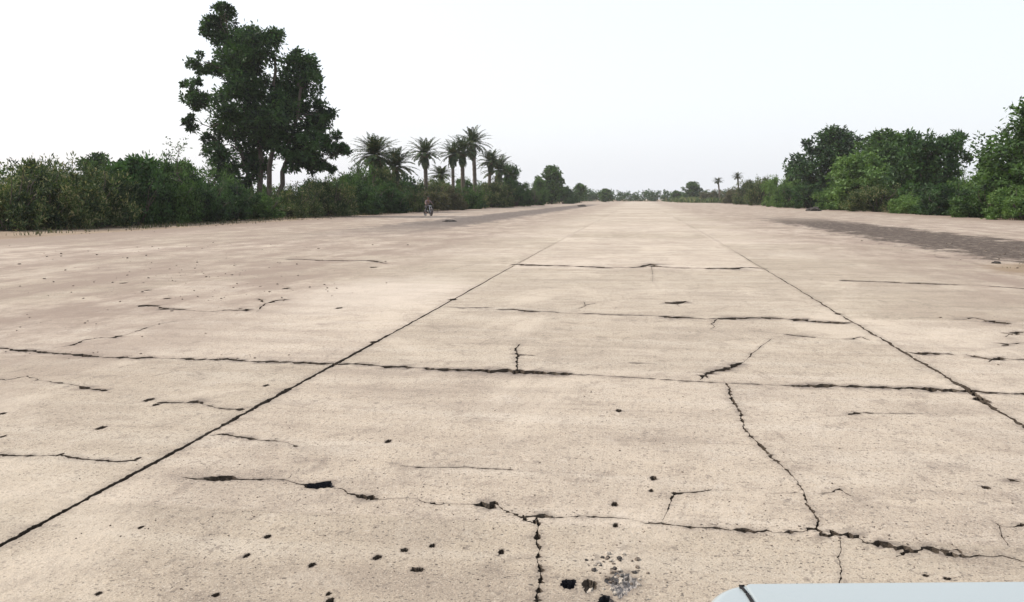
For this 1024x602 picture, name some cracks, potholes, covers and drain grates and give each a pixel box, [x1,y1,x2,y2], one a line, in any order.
crack [512,264,765,280]
pothole [582,579,597,593]
pothole [300,481,335,489]
pothole [604,572,638,599]
crack [0,299,1024,602]
pothole [560,579,577,590]
